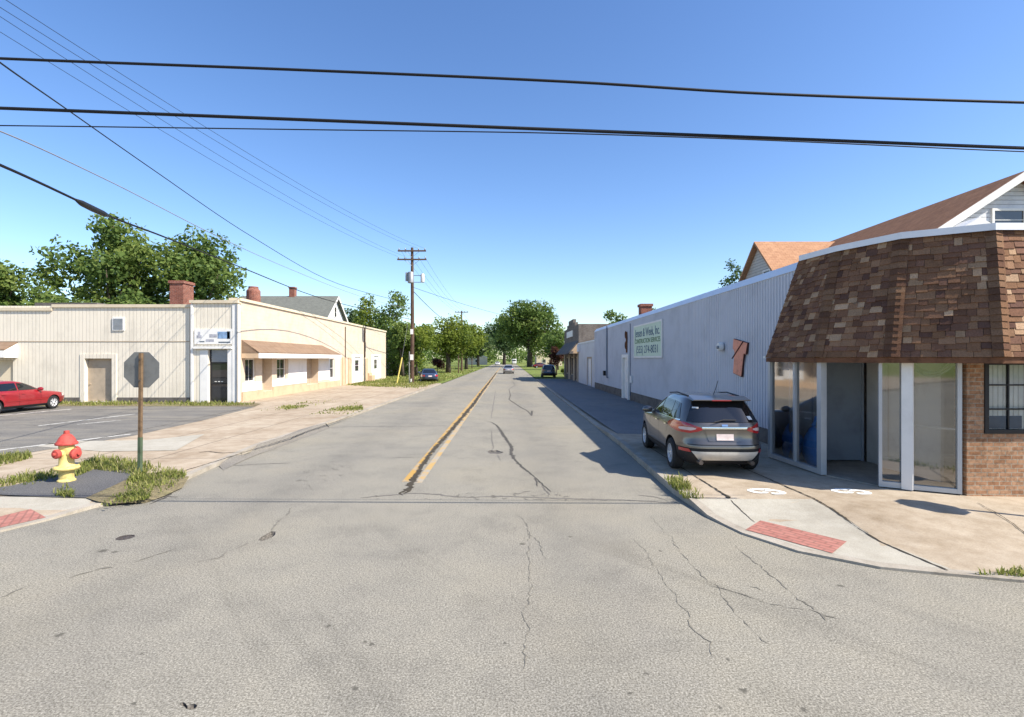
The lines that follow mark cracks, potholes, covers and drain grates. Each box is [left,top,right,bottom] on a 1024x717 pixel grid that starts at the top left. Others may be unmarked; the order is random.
crack [633,539,712,654]
crack [515,514,546,671]
crack [200,461,354,561]
crack [657,523,863,644]
crack [388,382,553,461]
